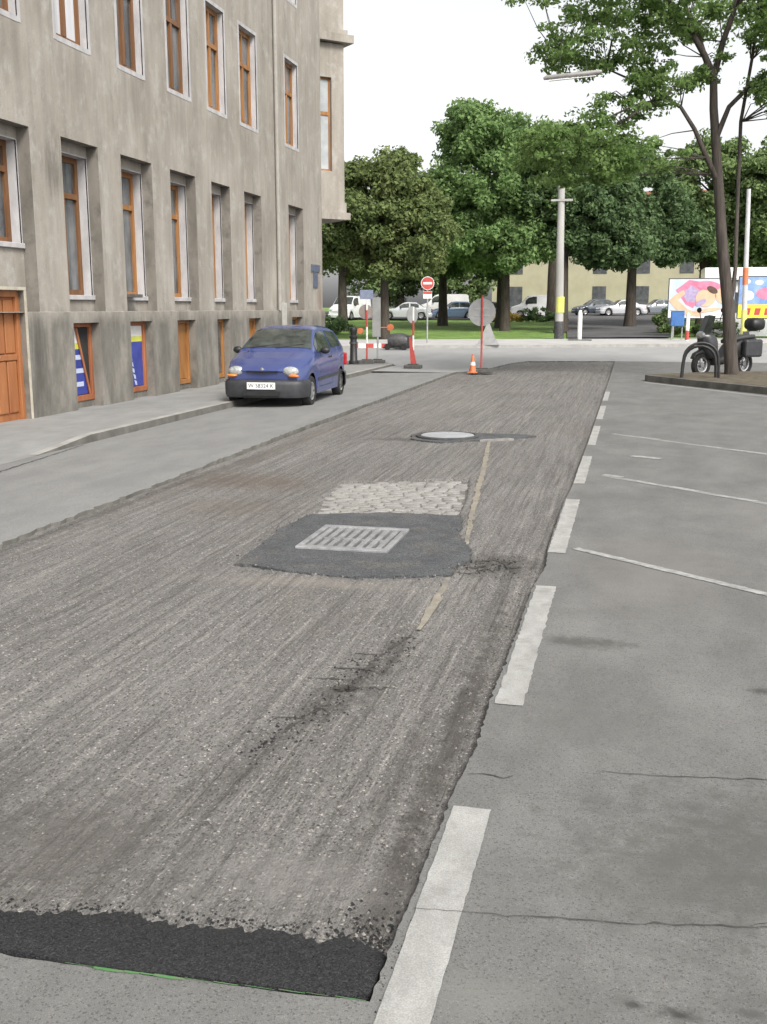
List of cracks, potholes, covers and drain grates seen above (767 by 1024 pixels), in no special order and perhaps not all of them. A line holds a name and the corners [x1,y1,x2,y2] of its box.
drain grate [295,524,410,553]
manhole cover [416,431,480,440]
